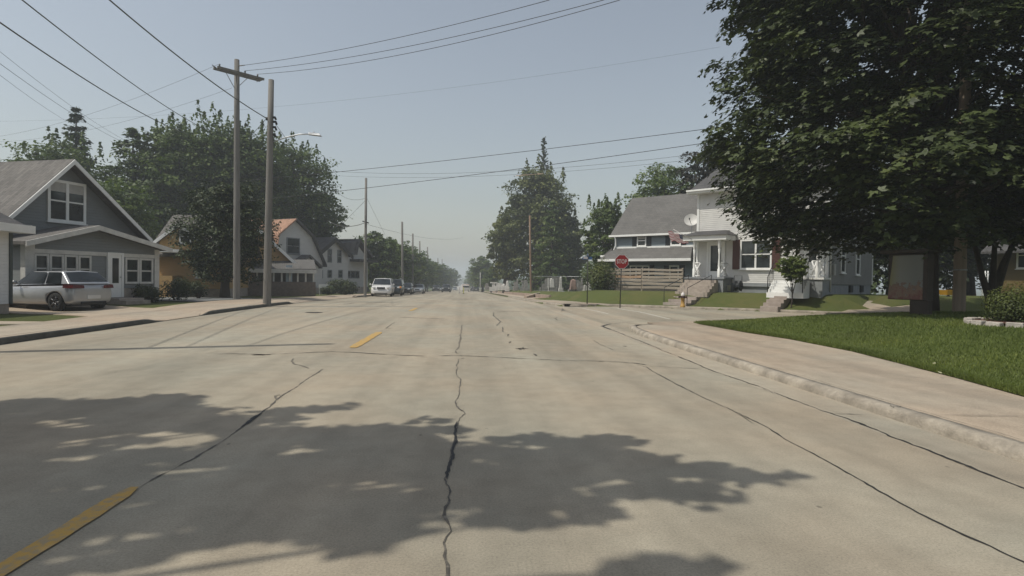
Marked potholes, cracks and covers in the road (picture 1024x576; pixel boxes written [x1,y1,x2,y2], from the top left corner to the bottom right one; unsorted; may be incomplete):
crack [439,326,465,576]
crack [140,358,321,487]
crack [644,366,1024,562]
